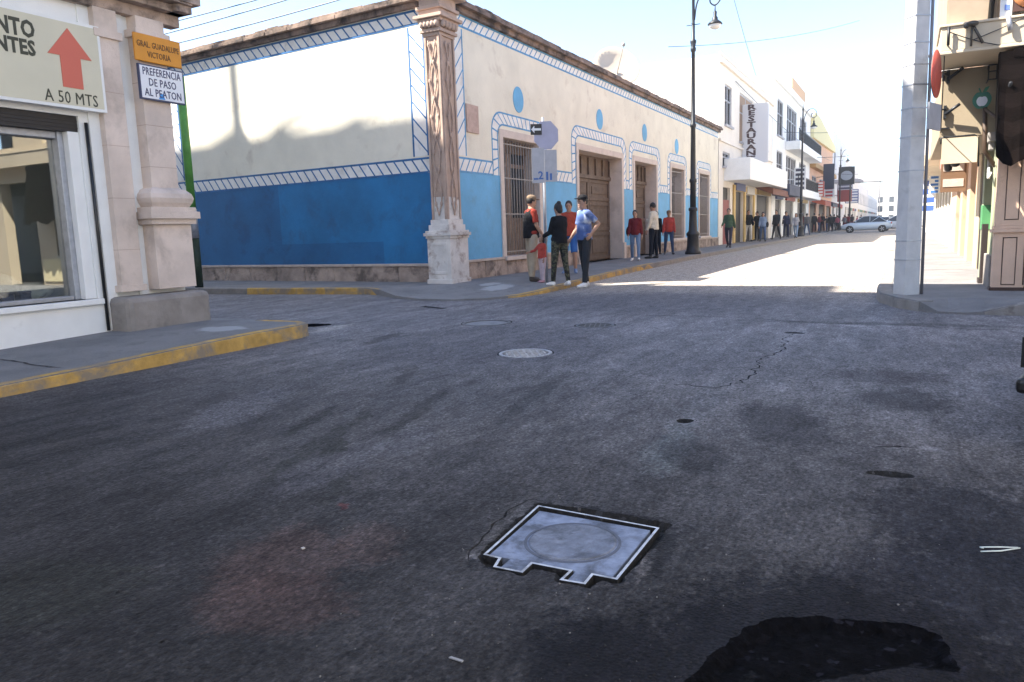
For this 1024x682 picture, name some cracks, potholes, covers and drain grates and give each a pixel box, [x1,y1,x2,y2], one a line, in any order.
pothole [683,615,960,682]
crack [674,334,793,389]
manhole cover [497,348,554,358]
utility cover [477,502,673,589]
